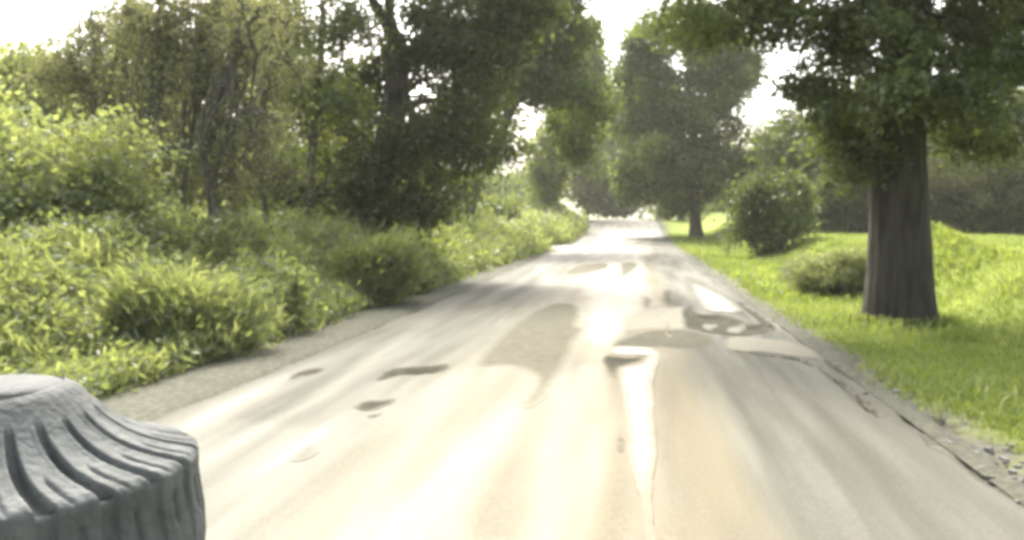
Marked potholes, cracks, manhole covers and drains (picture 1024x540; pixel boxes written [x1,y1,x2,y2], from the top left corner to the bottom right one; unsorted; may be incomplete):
pothole [374,364,450,380]
pothole [682,306,777,336]
pothole [353,397,396,410]
pothole [289,368,324,379]
crack [756,354,879,418]
